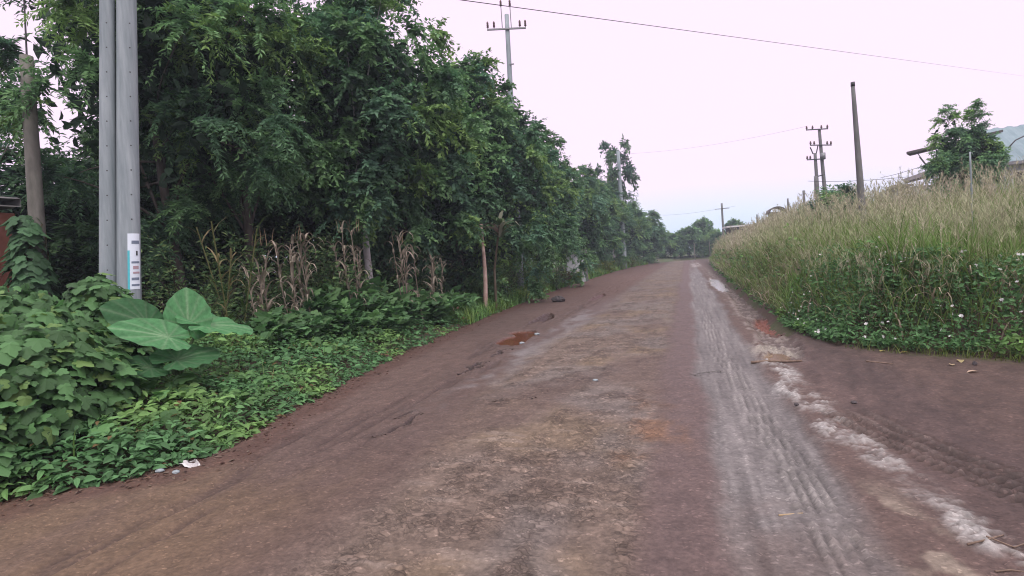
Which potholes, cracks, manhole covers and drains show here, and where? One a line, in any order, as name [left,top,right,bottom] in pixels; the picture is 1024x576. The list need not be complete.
pothole [706,278,732,294]
pothole [489,329,543,347]
pothole [522,313,559,326]
